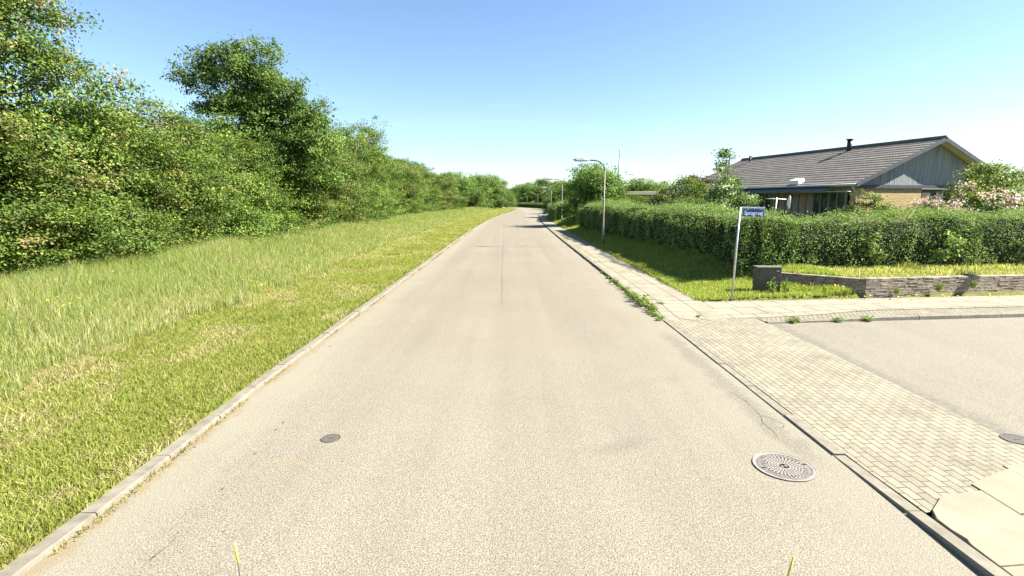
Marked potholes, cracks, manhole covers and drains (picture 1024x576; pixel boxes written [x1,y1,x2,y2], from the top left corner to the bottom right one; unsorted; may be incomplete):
manhole cover [752,452,817,482]
utility cover [999,433,1024,445]
utility cover [321,434,341,443]
